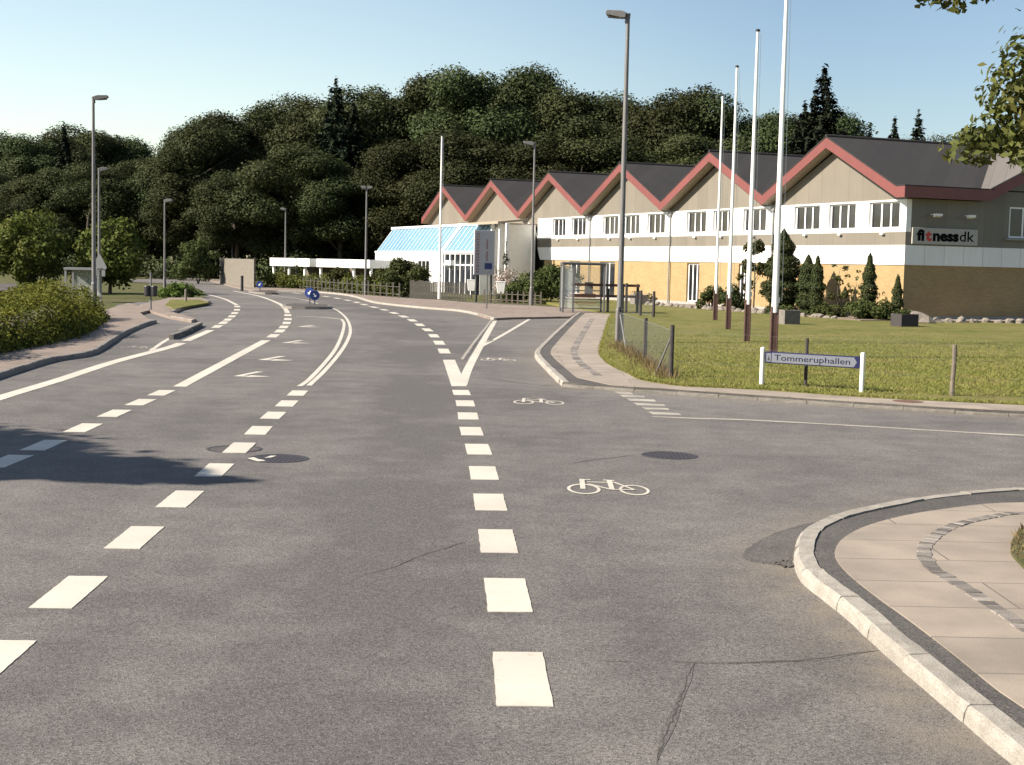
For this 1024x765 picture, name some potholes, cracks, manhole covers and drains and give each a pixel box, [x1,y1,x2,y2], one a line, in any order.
crack [598,650,878,764]
manhole cover [641,451,698,459]
manhole cover [247,454,309,463]
